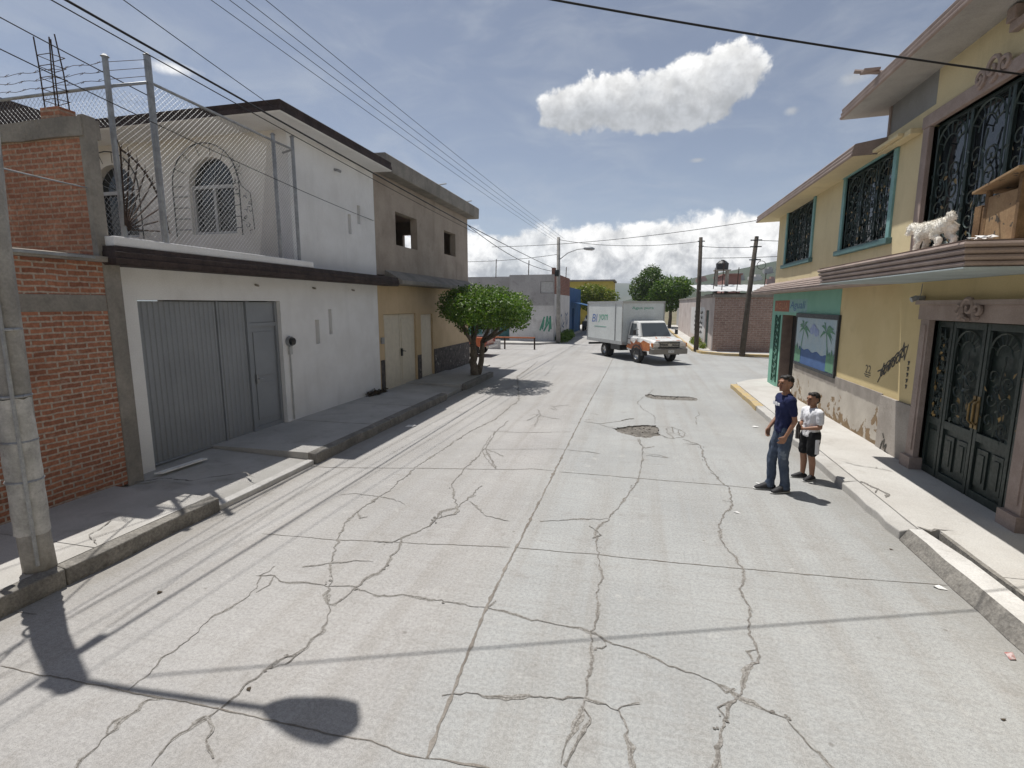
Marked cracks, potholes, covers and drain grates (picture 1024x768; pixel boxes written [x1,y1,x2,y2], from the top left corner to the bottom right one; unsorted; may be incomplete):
pothole [614,425,660,438]
crack [74,364,835,768]
